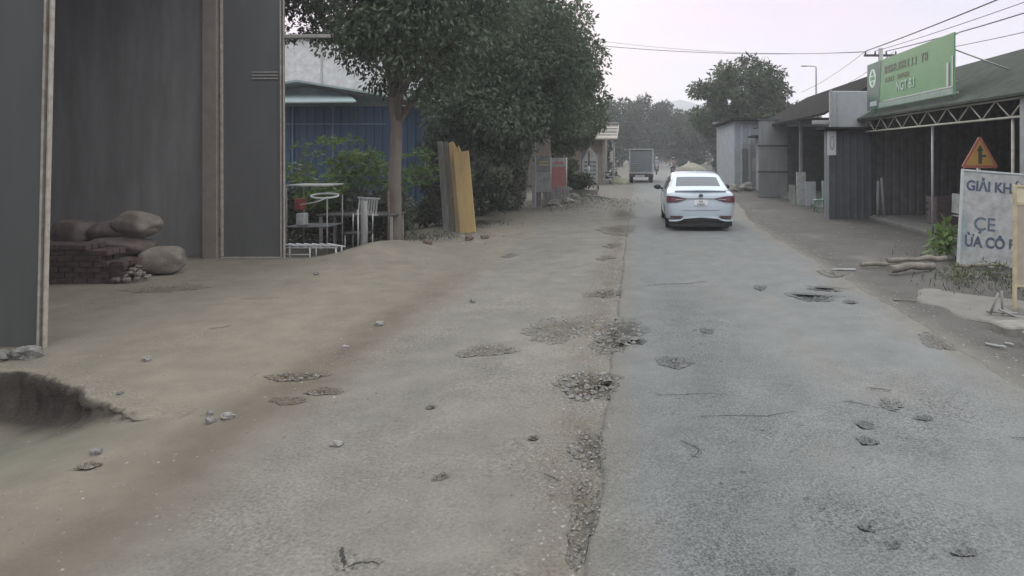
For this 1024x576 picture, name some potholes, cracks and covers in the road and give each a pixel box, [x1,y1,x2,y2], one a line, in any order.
pothole [264,372,332,382]
pothole [786,292,839,302]
pothole [304,386,345,395]
pothole [856,436,879,445]
pothole [588,316,652,355]
pothole [454,342,521,358]
pothole [880,398,904,410]
pothole [568,426,606,471]
crack [331,545,385,573]
pothole [521,315,599,345]
crack [678,439,705,458]
pothole [552,369,623,402]
